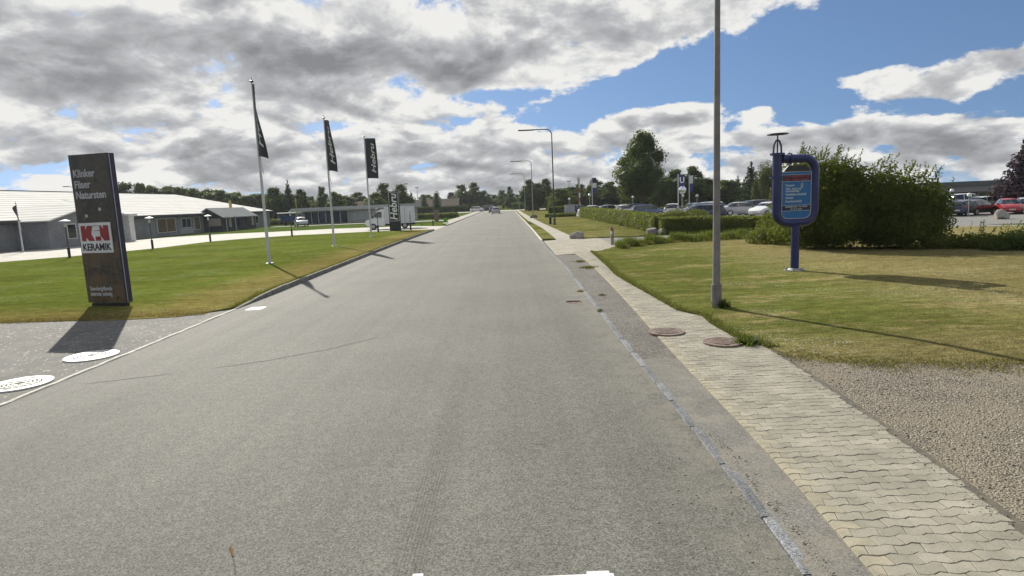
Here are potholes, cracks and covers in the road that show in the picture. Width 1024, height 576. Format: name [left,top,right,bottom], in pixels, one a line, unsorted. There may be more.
manhole cover [703,337,743,348]
manhole cover [62,349,120,363]
manhole cover [0,375,55,393]
manhole cover [649,328,685,337]
